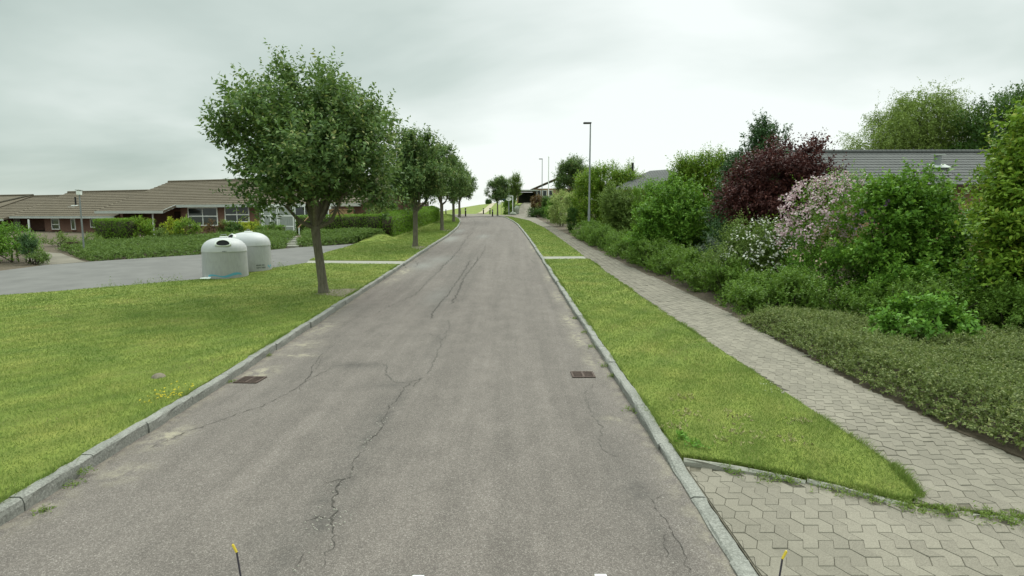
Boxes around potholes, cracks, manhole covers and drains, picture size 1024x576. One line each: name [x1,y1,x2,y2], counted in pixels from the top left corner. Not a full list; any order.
crack [154,219,489,446]
crack [292,380,420,572]
crack [584,381,639,457]
